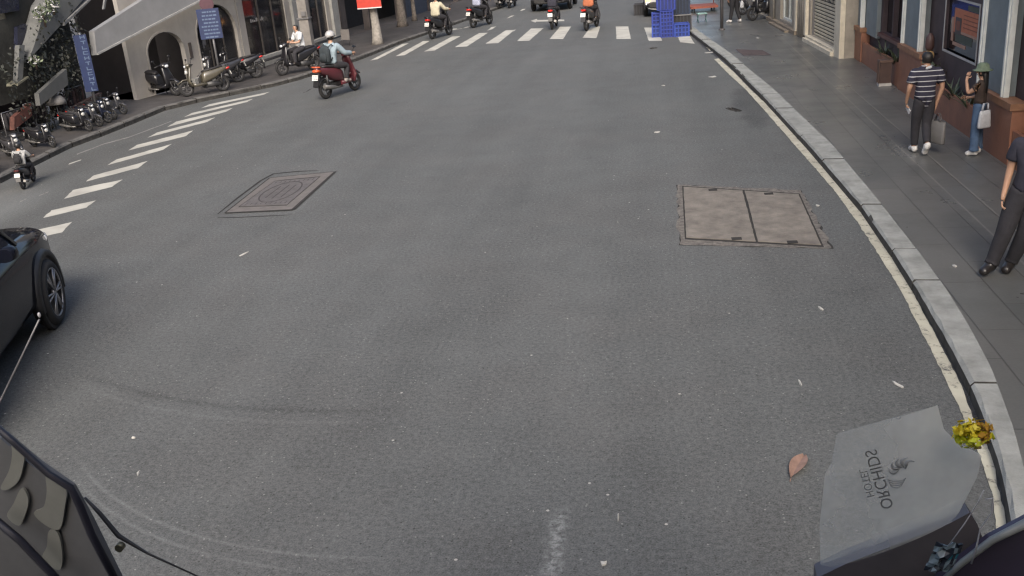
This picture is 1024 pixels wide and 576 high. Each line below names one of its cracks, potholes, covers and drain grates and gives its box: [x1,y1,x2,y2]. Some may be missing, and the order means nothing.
utility cover [676,185,834,249]
manhole cover [218,170,336,218]
